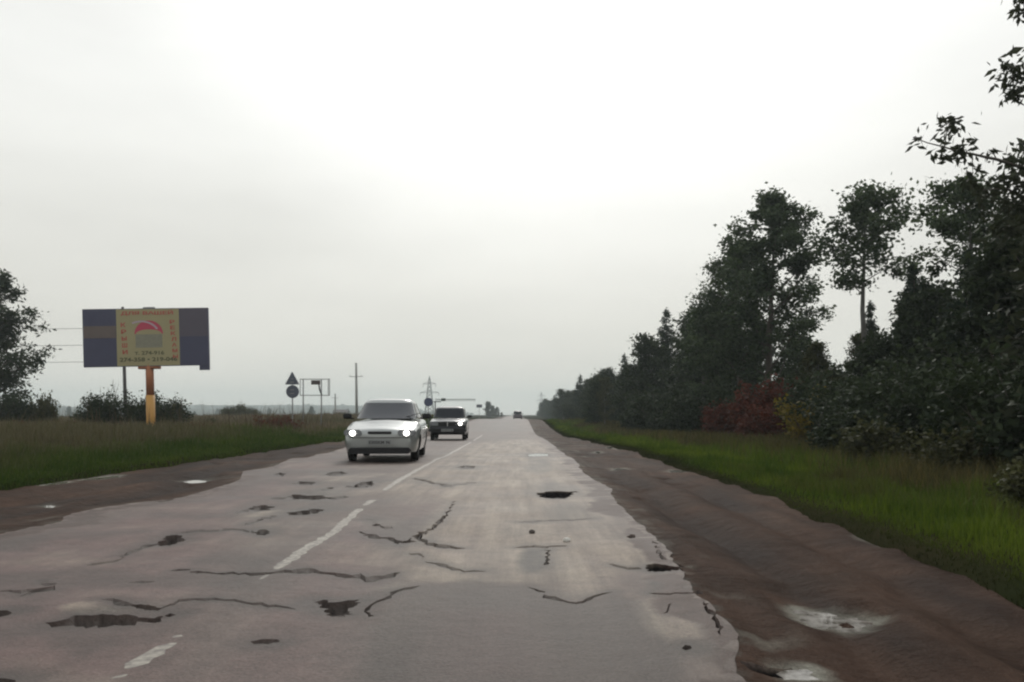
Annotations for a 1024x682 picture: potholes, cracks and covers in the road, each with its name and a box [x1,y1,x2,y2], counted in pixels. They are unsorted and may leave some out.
crack [0,580,57,597]
pothole [537,491,576,499]
pothole [156,534,185,546]
pothole [314,599,361,618]
pothole [44,613,175,628]
crack [528,587,610,604]
crack [86,478,486,617]
pothole [645,563,685,572]
